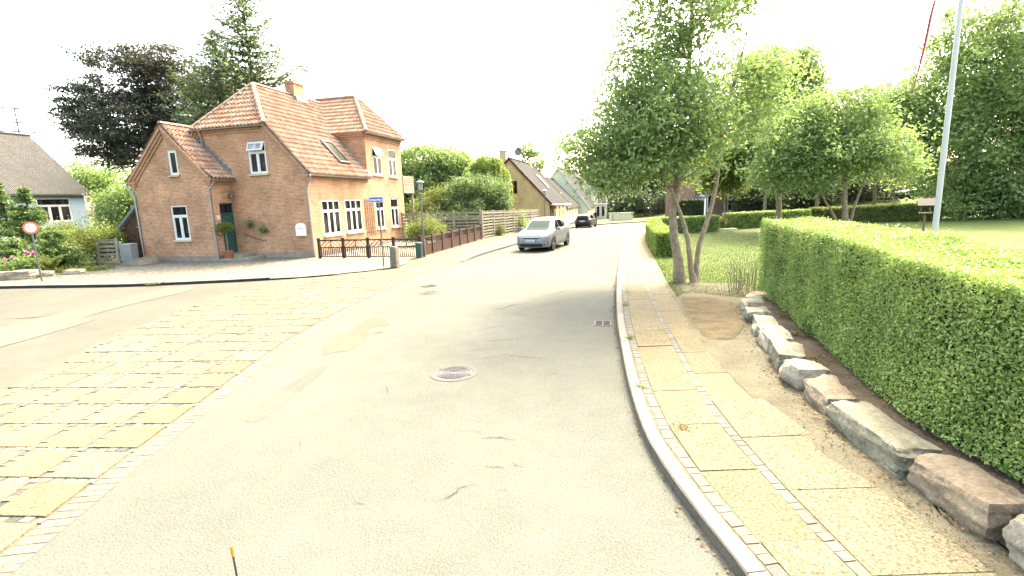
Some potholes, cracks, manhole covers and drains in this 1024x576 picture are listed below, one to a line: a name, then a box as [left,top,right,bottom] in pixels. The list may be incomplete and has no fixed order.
manhole cover [430,365,478,382]
